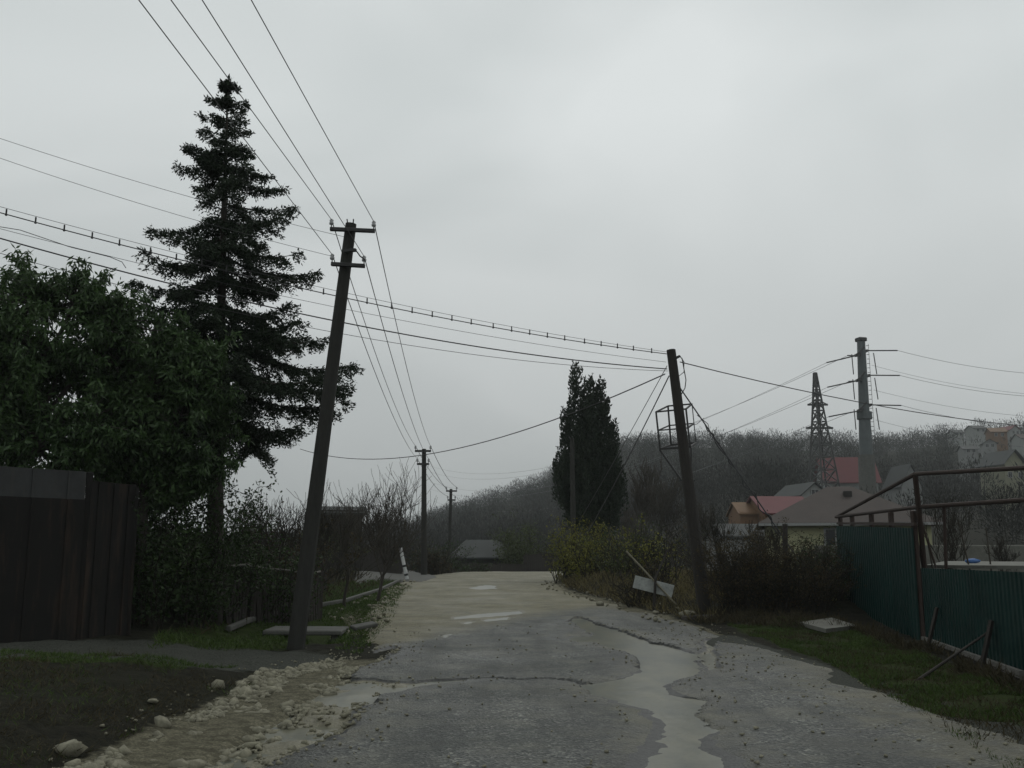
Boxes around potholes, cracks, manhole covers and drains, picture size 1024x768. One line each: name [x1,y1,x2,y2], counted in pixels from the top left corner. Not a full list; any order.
crack [479,677,586,685]
pothole [566,616,747,768]
